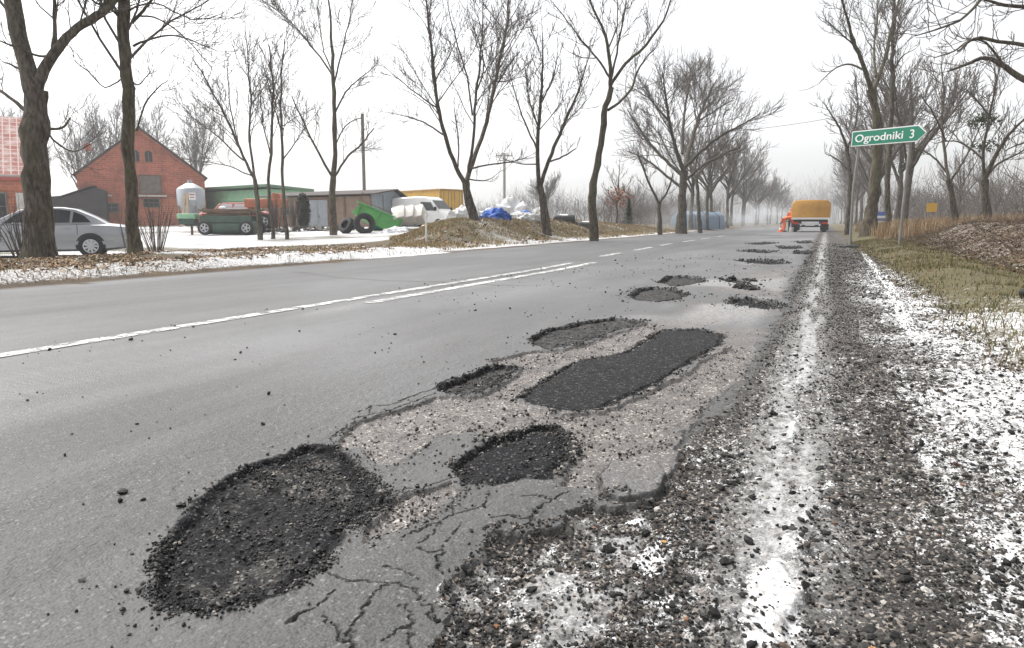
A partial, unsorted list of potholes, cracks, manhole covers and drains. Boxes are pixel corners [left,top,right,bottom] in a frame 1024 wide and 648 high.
pothole [699,293,816,314]
crack [283,476,572,648]
pothole [729,282,766,291]
pothole [654,275,709,287]
pothole [618,286,706,302]
pothole [315,320,763,488]
pothole [714,275,772,284]
pothole [47,426,474,647]
pothole [391,414,627,521]
